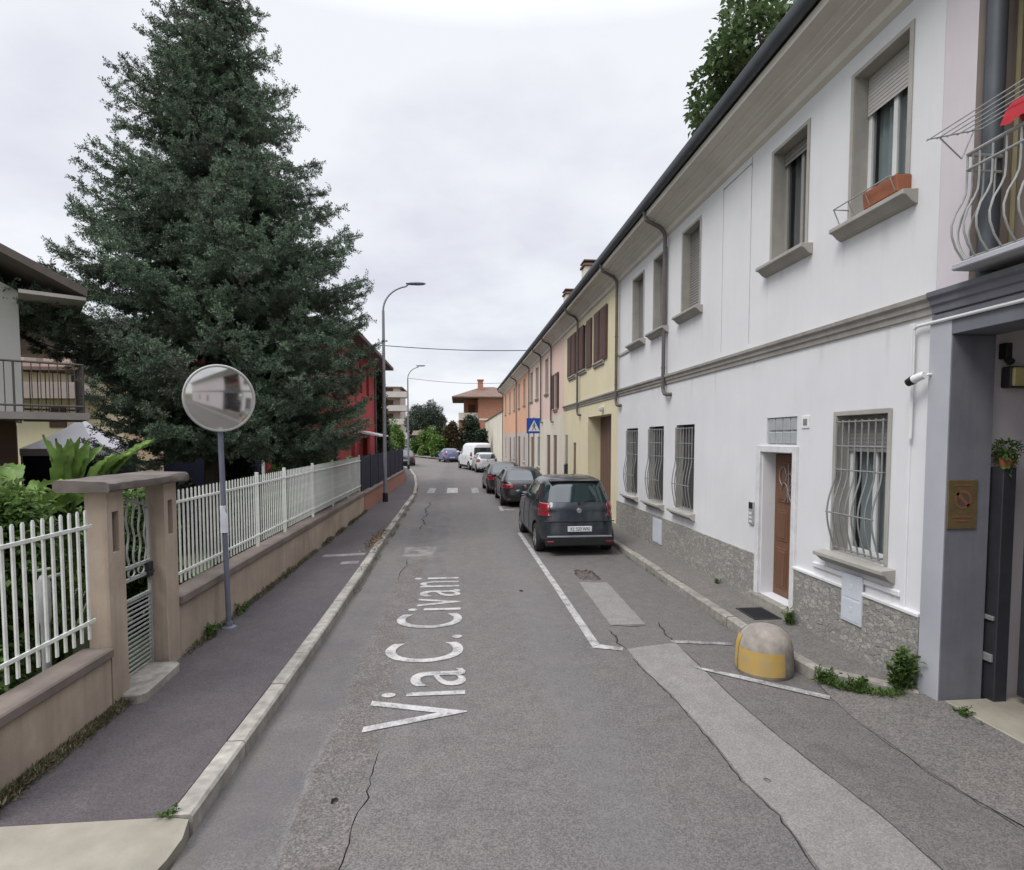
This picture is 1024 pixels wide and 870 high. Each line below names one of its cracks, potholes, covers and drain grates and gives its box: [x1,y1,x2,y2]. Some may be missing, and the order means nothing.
crack [338,752,379,870]
crack [610,622,1024,870]
pothole [574,569,601,581]
